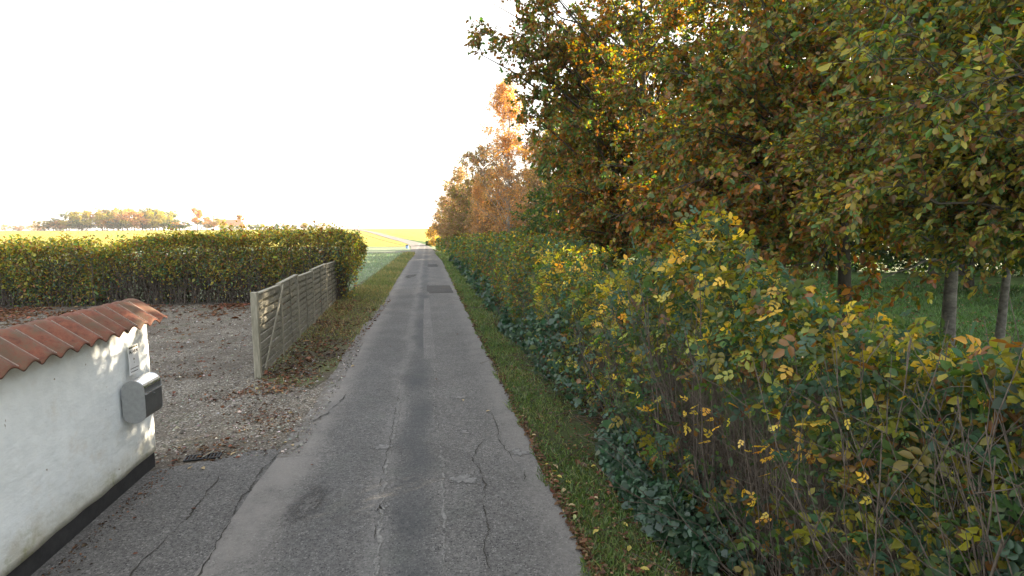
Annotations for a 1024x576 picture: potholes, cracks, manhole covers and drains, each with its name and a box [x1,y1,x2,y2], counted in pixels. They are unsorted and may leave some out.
crack [471,410,526,573]
crack [374,396,399,538]
crack [129,470,223,576]
drain grate [183,452,222,462]
